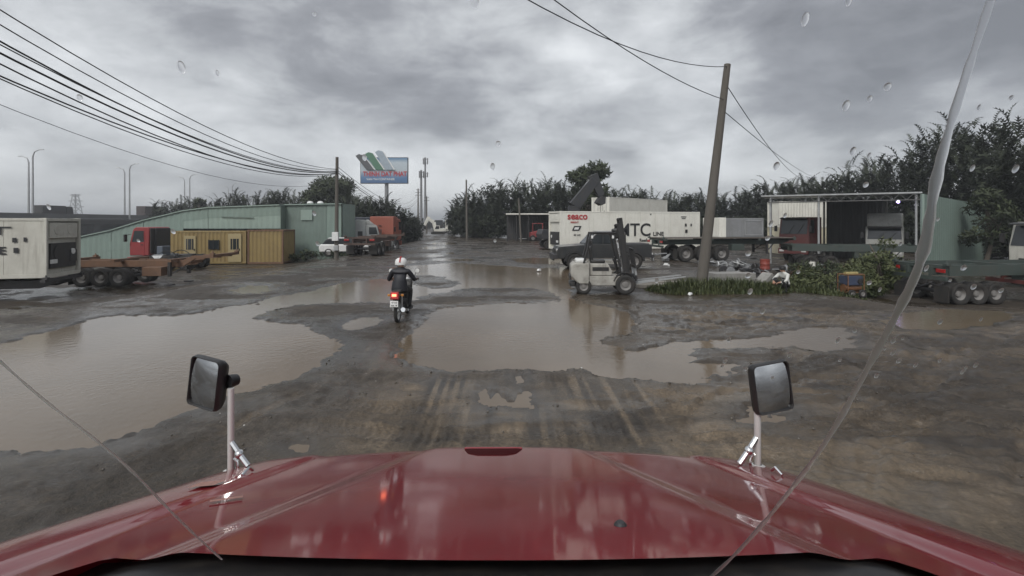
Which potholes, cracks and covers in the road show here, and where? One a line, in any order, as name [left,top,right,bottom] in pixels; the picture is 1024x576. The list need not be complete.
pothole [511,257,562,265]
pothole [508,371,532,386]
pothole [867,309,1024,330]
pothole [389,300,641,373]
pothole [0,302,352,456]
pothole [582,325,866,386]
pothole [382,262,576,300]
pothole [335,315,388,331]
pothole [253,278,393,310]
pothole [471,384,541,410]
